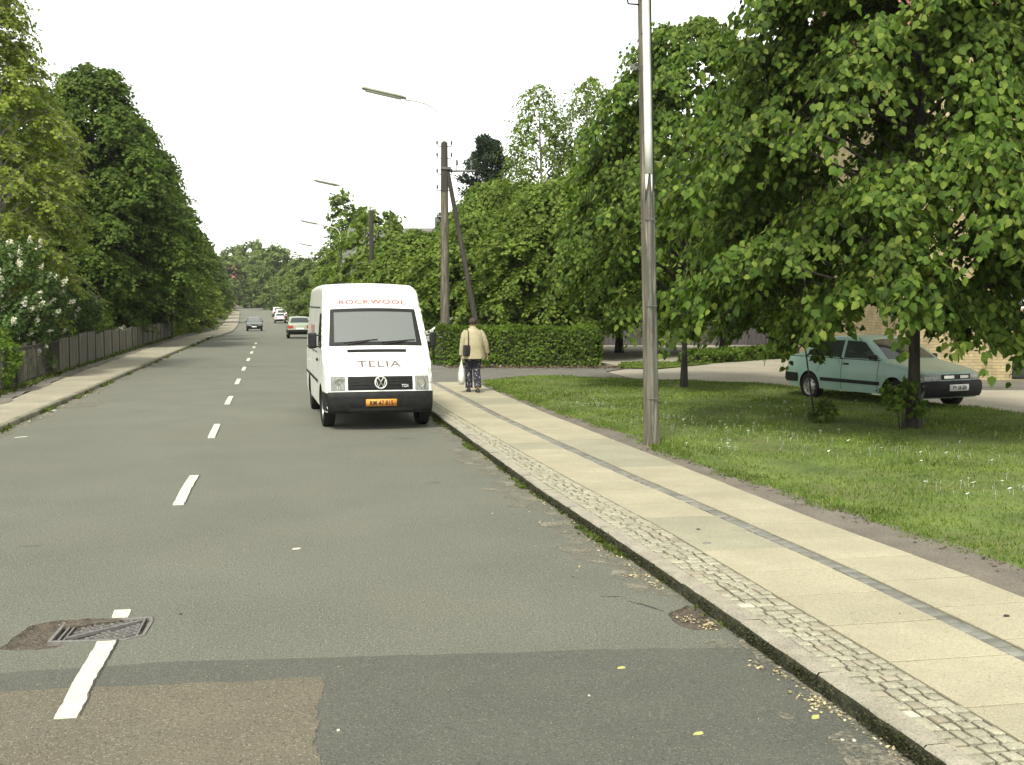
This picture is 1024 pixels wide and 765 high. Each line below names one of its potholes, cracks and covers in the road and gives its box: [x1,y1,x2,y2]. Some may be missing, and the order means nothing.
pothole [668,605,722,631]
